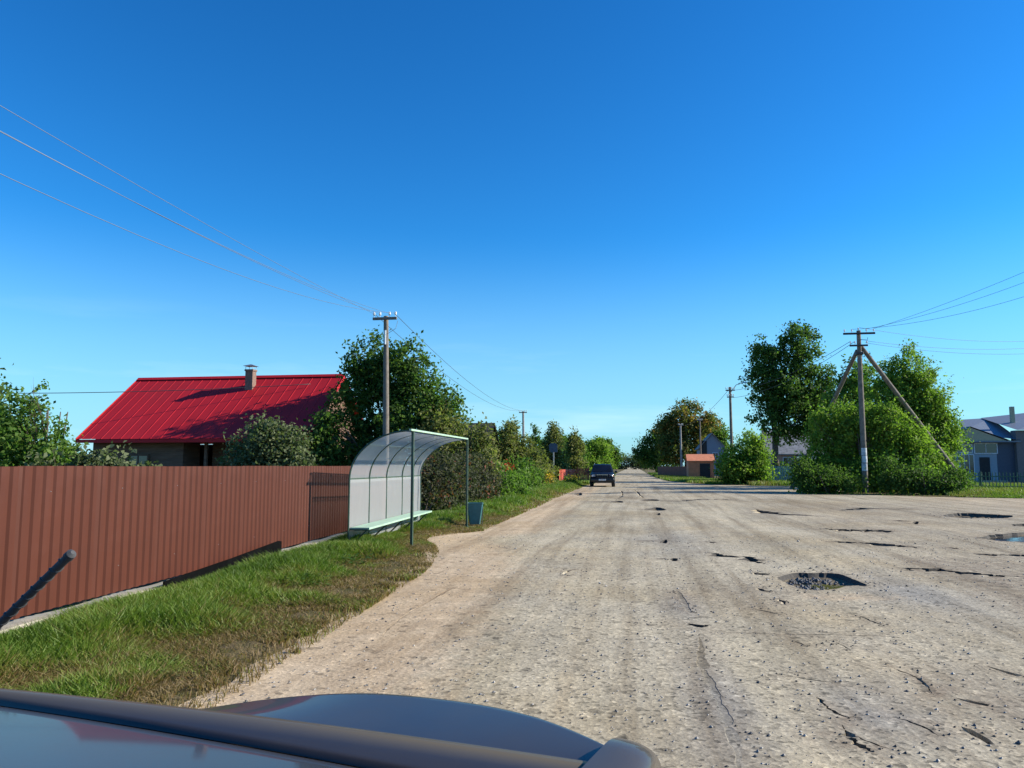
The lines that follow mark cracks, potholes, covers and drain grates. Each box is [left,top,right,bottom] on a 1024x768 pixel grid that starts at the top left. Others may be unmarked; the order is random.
pothole [777,573,867,590]
crack [961,727,995,745]
pothole [974,532,1024,542]
crack [784,675,886,752]
crack [676,590,691,613]
crack [897,669,934,695]
